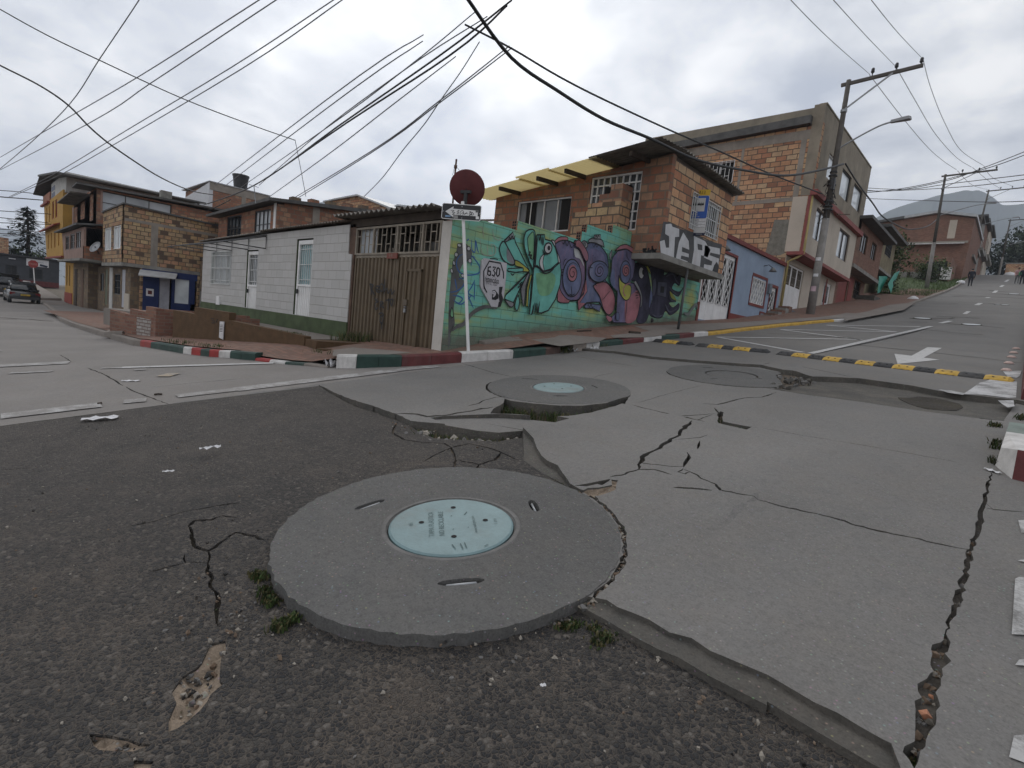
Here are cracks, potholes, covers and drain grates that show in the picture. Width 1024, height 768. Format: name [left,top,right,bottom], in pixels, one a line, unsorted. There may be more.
manhole cover [667,365,799,389]
pothole [89,734,152,752]
manhole cover [267,467,621,648]
manhole cover [488,375,631,404]
crack [128,503,268,626]
pothole [771,370,825,390]
crack [642,371,776,415]
crack [319,356,630,468]
crack [575,421,968,614]
pothole [139,641,226,734]
